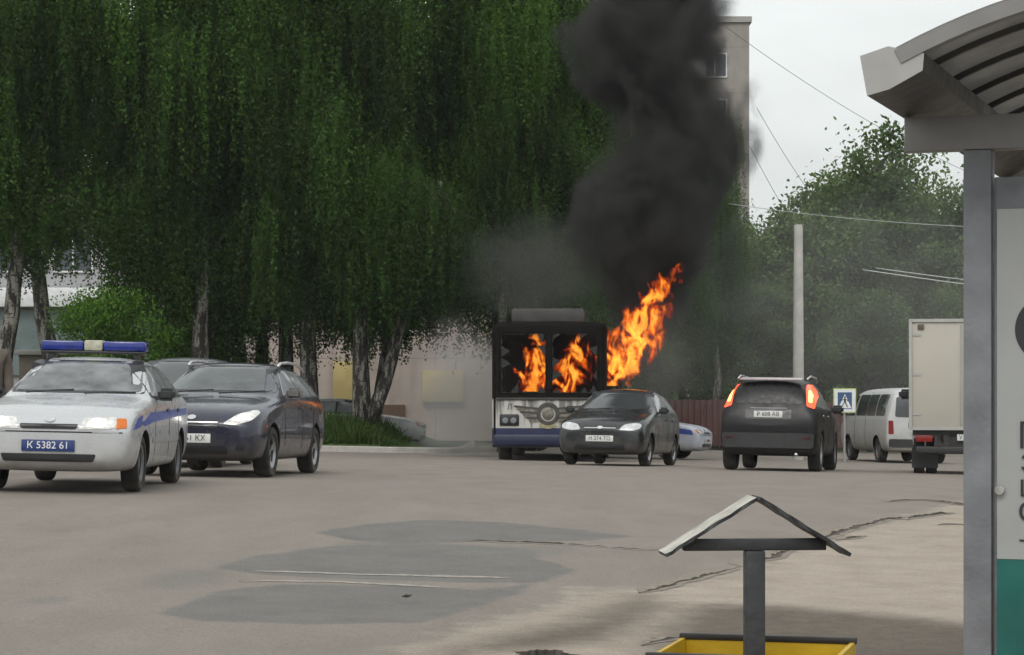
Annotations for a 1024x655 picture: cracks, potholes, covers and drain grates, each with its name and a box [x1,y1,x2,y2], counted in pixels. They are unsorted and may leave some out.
crack [459,499,963,593]
crack [642,636,680,645]
